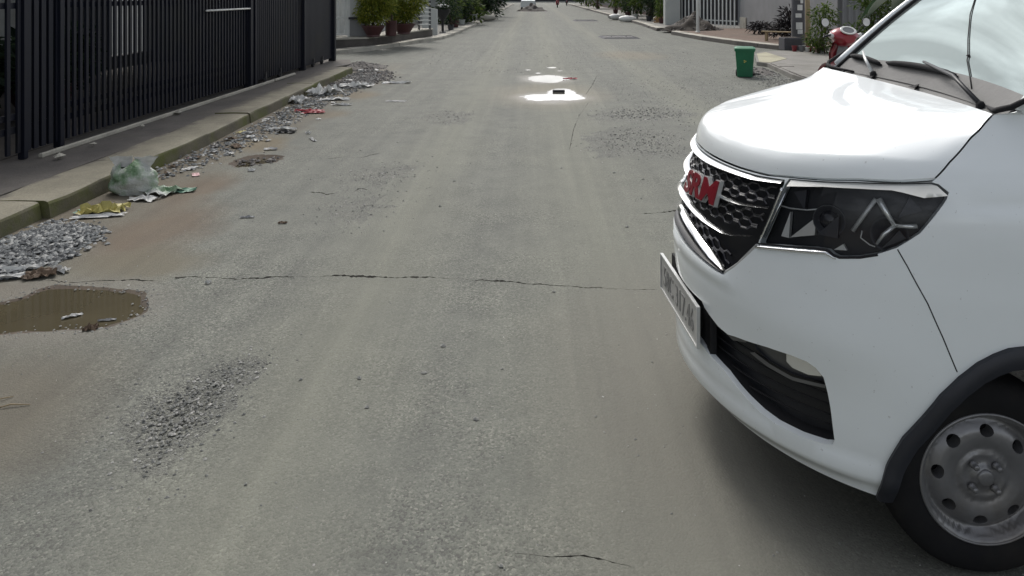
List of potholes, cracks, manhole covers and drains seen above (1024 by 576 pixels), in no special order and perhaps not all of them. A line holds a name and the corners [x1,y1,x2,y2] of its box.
pothole [0,281,163,338]
pothole [228,152,285,167]
pothole [55,334,302,511]
pothole [528,75,570,83]
crack [175,274,655,290]
pothole [519,88,586,101]
crack [515,553,631,567]
